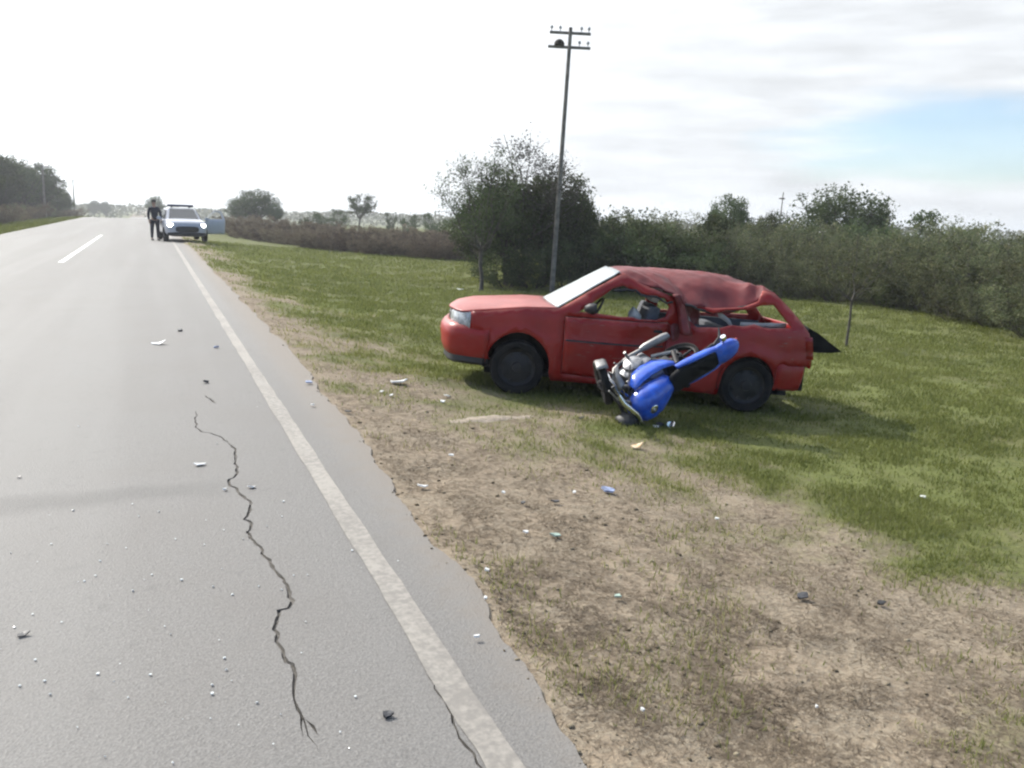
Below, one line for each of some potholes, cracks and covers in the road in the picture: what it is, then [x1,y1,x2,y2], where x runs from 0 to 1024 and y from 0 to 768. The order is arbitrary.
crack [434,685,482,768]
crack [194,396,318,749]
